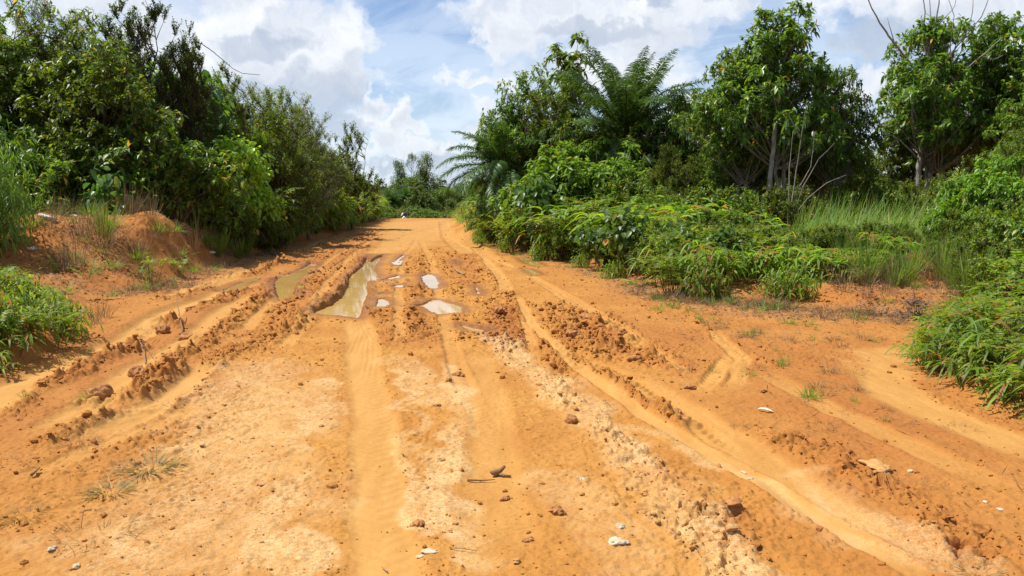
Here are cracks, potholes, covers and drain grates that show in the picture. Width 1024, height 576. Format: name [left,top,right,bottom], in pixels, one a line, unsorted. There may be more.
pothole [408,298,469,315]
pothole [268,260,322,302]
pothole [371,297,398,307]
pothole [417,272,445,289]
pothole [304,253,387,319]
